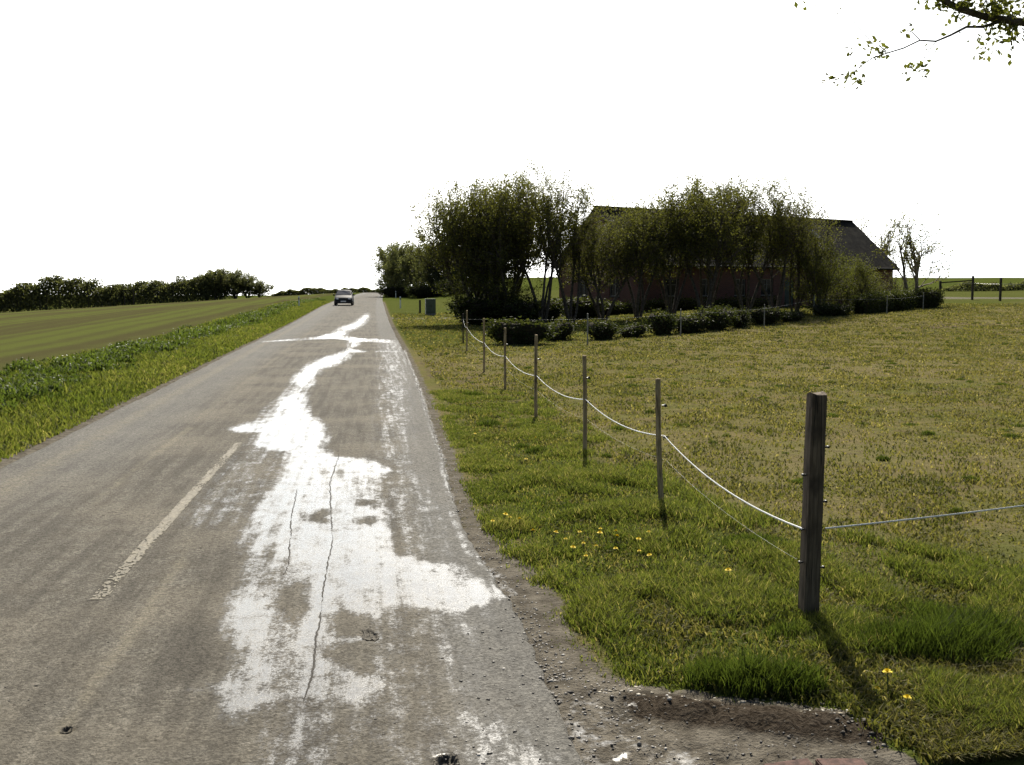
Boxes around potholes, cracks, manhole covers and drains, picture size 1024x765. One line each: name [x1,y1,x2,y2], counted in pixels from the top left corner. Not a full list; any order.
pothole [362,629,379,640]
pothole [433,754,460,765]
crack [283,489,297,575]
crack [303,454,339,700]
